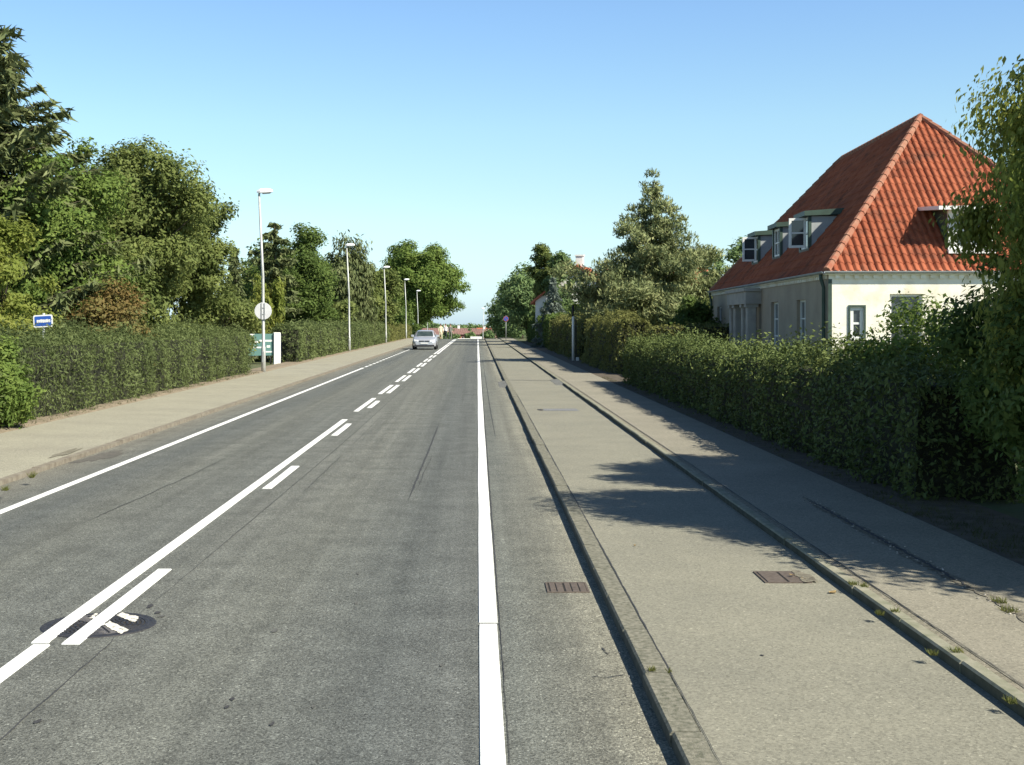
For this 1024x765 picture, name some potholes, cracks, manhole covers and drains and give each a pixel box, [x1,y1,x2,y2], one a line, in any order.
drain grate [545,582,590,593]
drain grate [753,571,812,583]
crack [408,425,439,500]
crack [81,461,219,524]
manhole cover [40,612,157,638]
